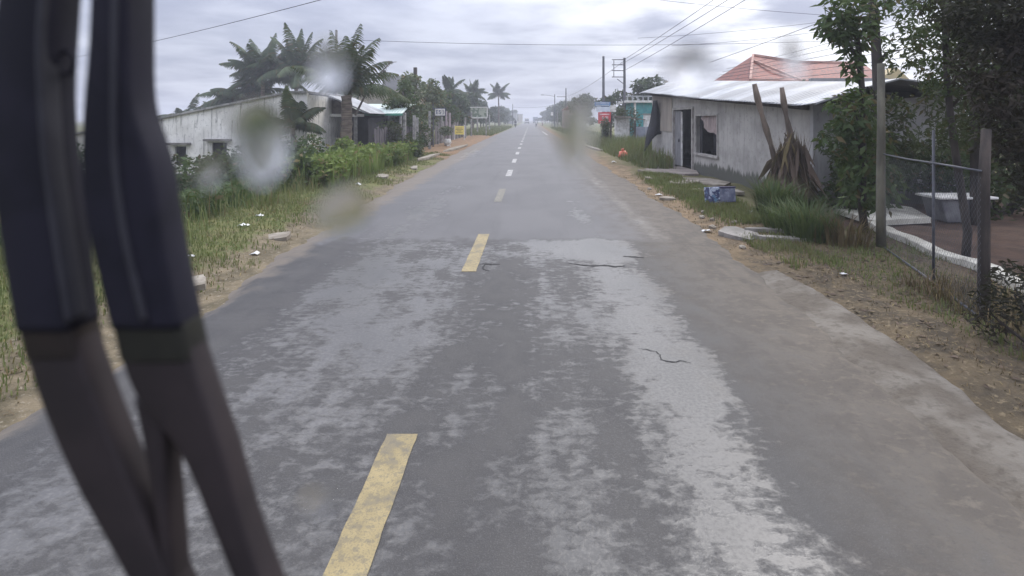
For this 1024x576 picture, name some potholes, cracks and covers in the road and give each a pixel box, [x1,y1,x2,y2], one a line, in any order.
crack [569,256,644,267]
